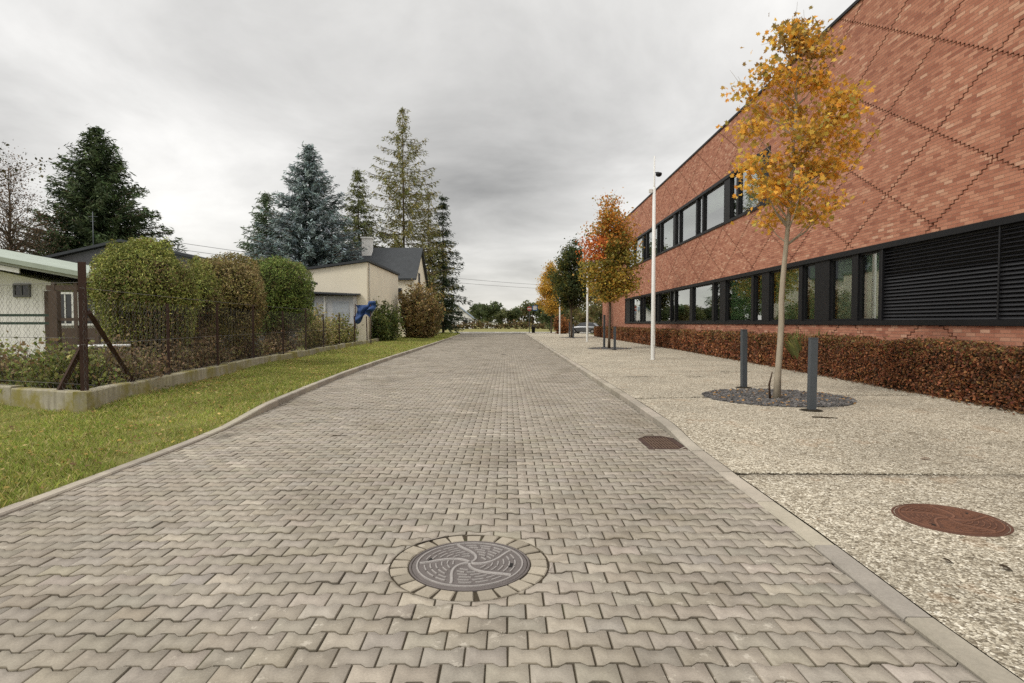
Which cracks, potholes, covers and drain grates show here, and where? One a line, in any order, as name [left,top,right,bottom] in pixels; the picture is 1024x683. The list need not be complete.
manhole cover [891,504,1014,537]
manhole cover [390,535,556,606]
